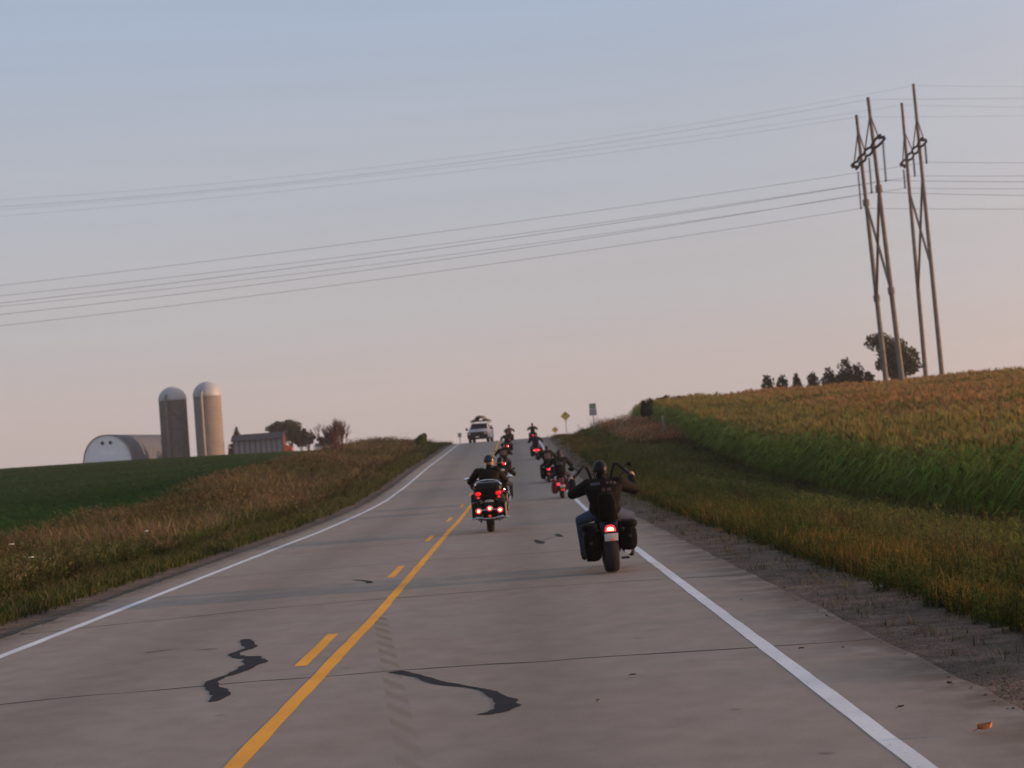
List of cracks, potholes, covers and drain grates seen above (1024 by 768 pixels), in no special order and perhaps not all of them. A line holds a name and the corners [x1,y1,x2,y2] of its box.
crack [0,639,871,705]
crack [19,574,746,635]
